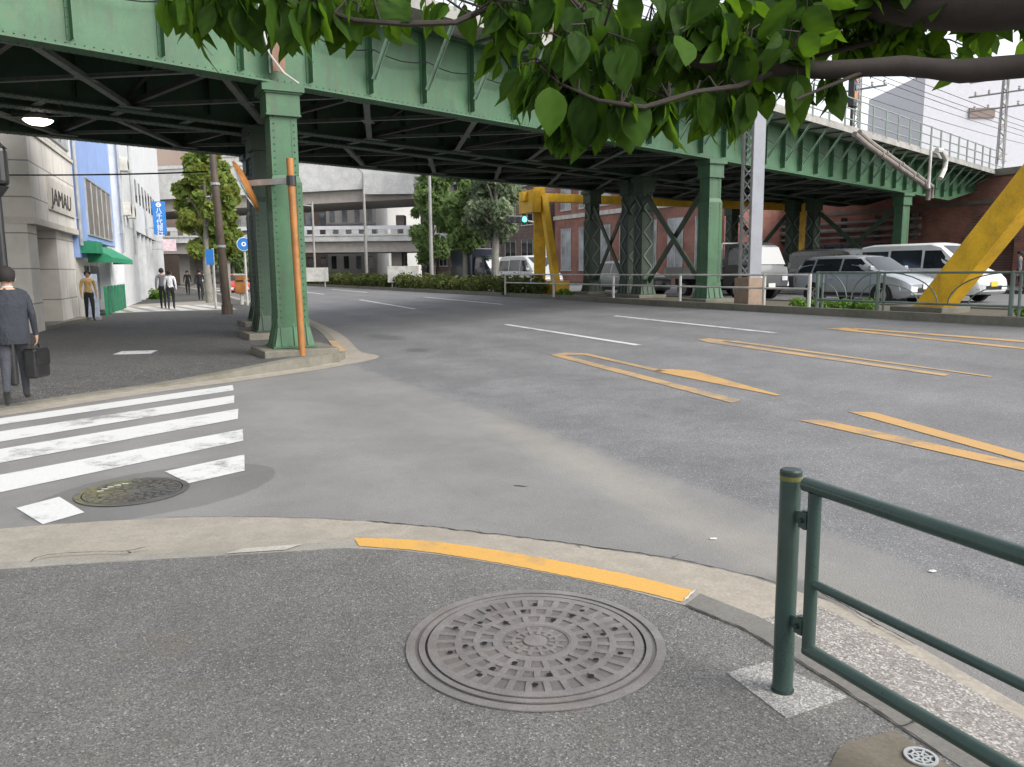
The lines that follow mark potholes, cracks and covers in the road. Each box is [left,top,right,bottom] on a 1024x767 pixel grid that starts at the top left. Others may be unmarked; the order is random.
crack [31,546,149,562]
manhole cover [406,590,666,712]
manhole cover [73,477,189,506]
